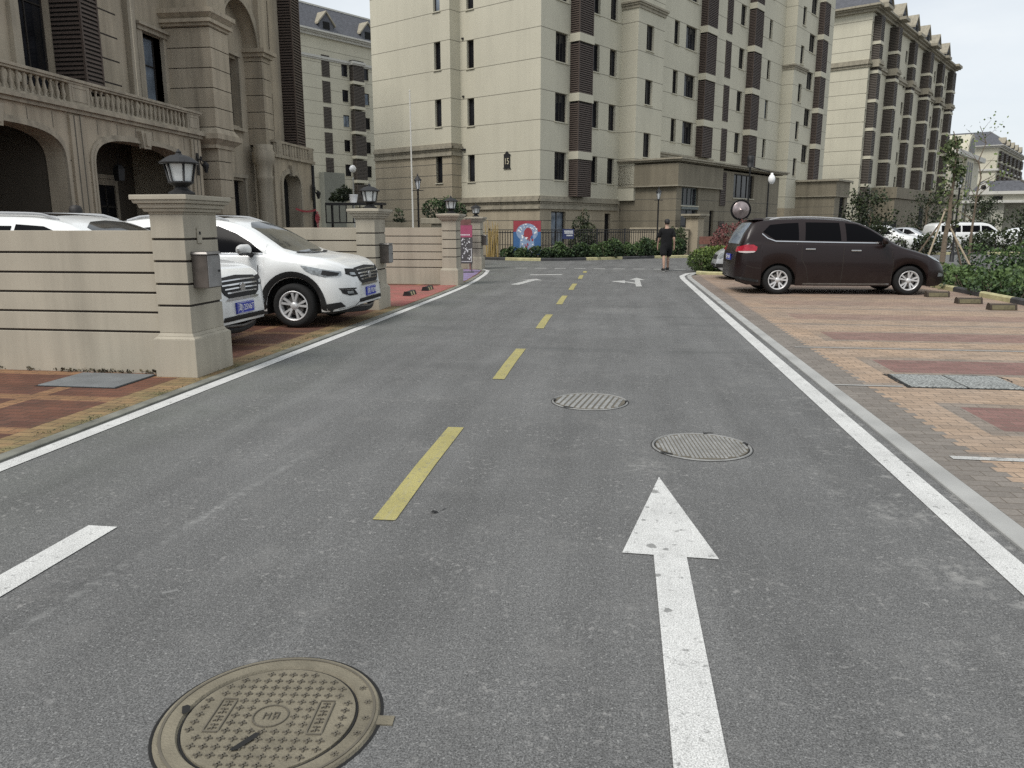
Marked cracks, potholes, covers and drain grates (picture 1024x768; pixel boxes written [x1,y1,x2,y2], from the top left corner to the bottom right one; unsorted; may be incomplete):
utility cover [887,374,968,389]
manhole cover [551,393,629,411]
manhole cover [148,657,395,768]
manhole cover [651,432,754,462]
utility cover [942,375,1024,391]
utility cover [36,372,157,389]
